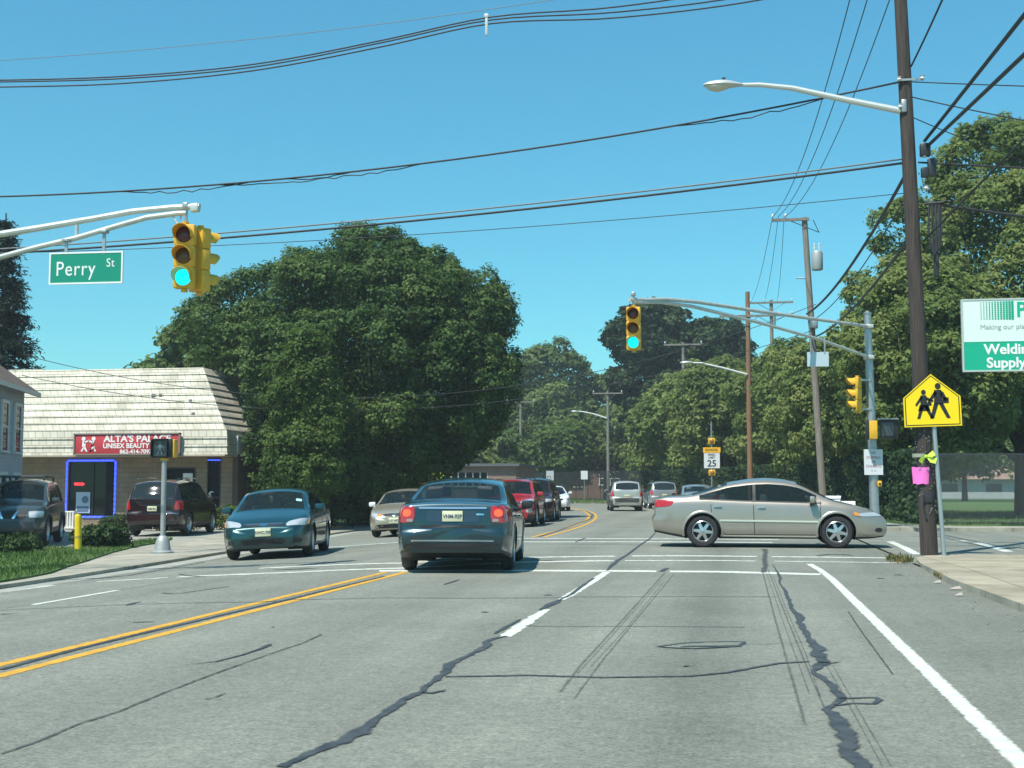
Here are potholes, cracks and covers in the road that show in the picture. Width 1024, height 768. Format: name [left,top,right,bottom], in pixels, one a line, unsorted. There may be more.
crack [848,611,894,674]
crack [1,634,321,754]
manhole cover [658,641,746,649]
